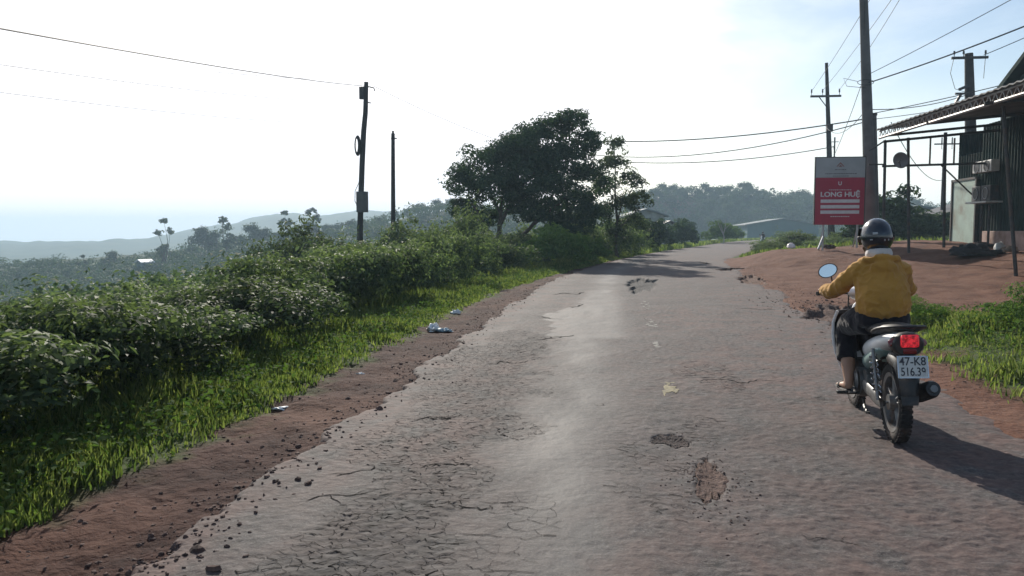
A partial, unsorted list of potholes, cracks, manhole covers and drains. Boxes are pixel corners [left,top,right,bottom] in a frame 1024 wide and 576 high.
crack [210,326,569,576]
pothole [695,458,729,504]
pothole [625,278,659,295]
pothole [650,434,690,449]
